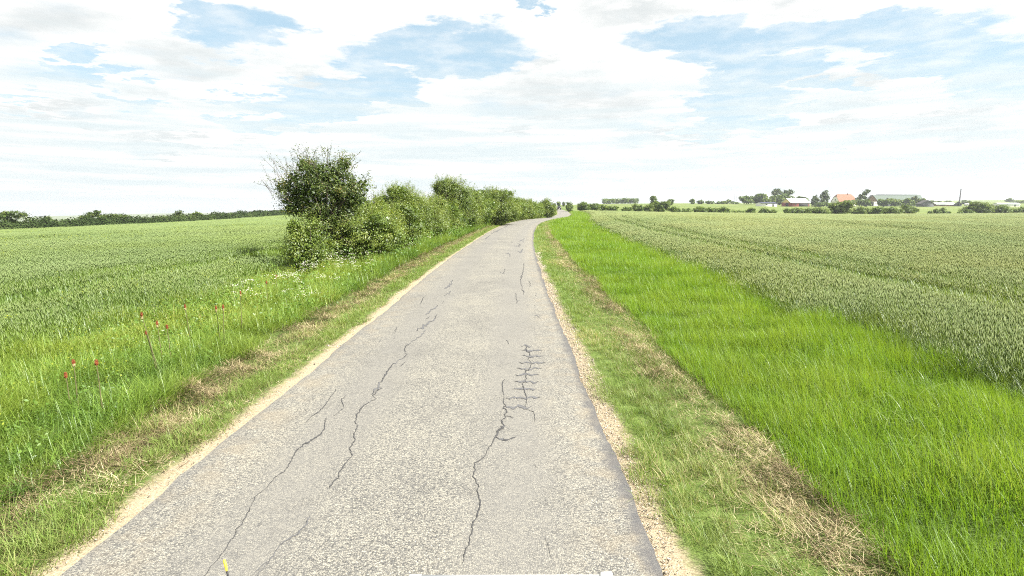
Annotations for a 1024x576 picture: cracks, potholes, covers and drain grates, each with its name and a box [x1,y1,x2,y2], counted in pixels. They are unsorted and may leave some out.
crack [461,340,545,566]
crack [204,280,453,576]
crack [485,225,540,318]
